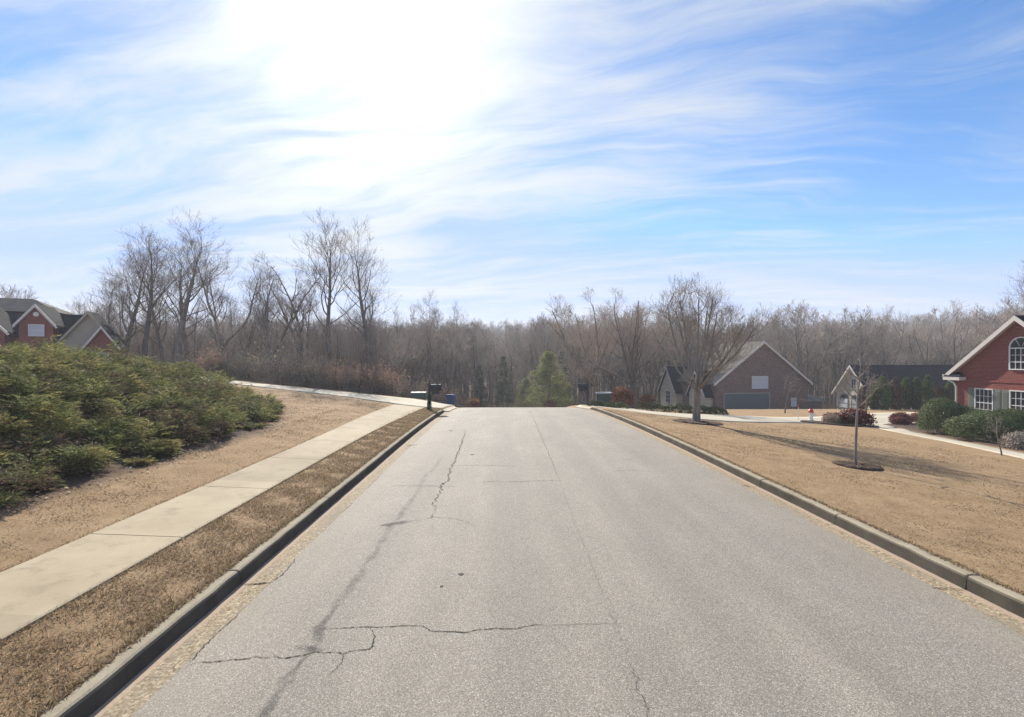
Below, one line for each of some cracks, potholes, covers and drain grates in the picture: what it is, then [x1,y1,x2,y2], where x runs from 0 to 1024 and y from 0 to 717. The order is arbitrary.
crack [430,431,469,523]
crack [187,465,628,675]
